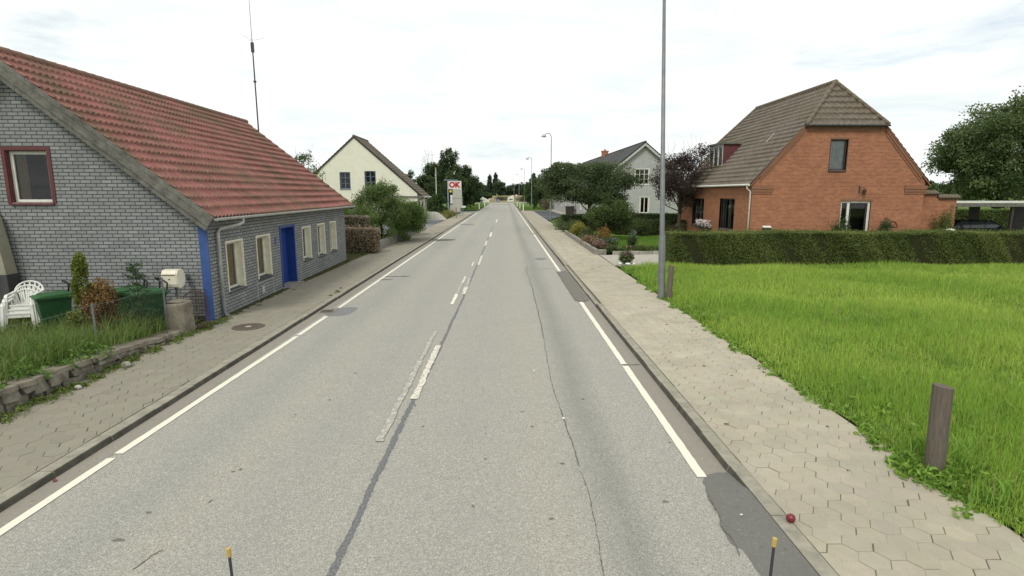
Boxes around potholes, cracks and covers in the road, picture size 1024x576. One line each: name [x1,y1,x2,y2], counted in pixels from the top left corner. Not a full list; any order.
manhole cover [231,323,265,331]
crack [525,266,604,576]
